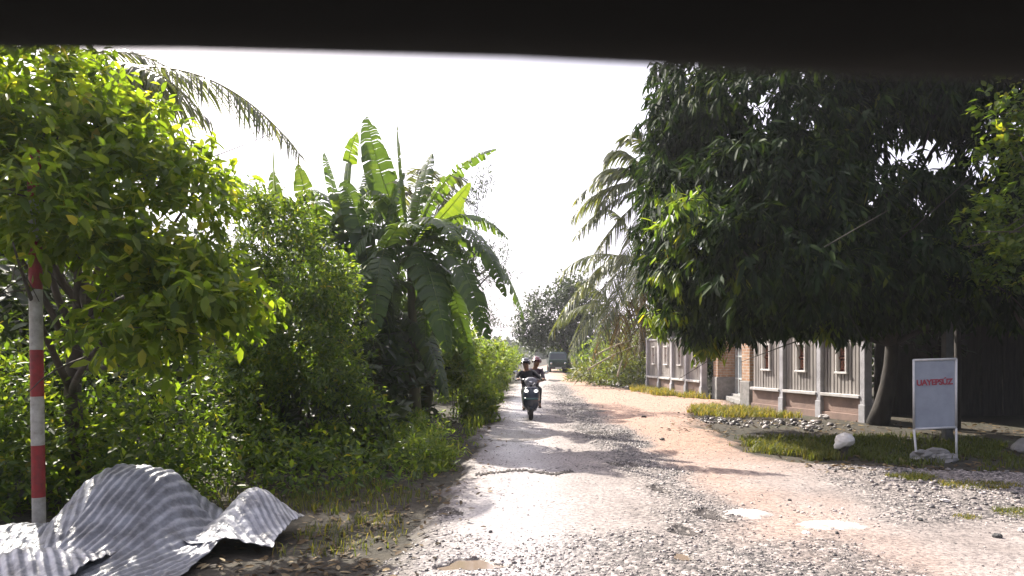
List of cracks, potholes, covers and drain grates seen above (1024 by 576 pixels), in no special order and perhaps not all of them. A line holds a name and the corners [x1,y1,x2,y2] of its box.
pothole [433,557,509,571]
pothole [667,525,703,537]
crack [475,468,574,476]
